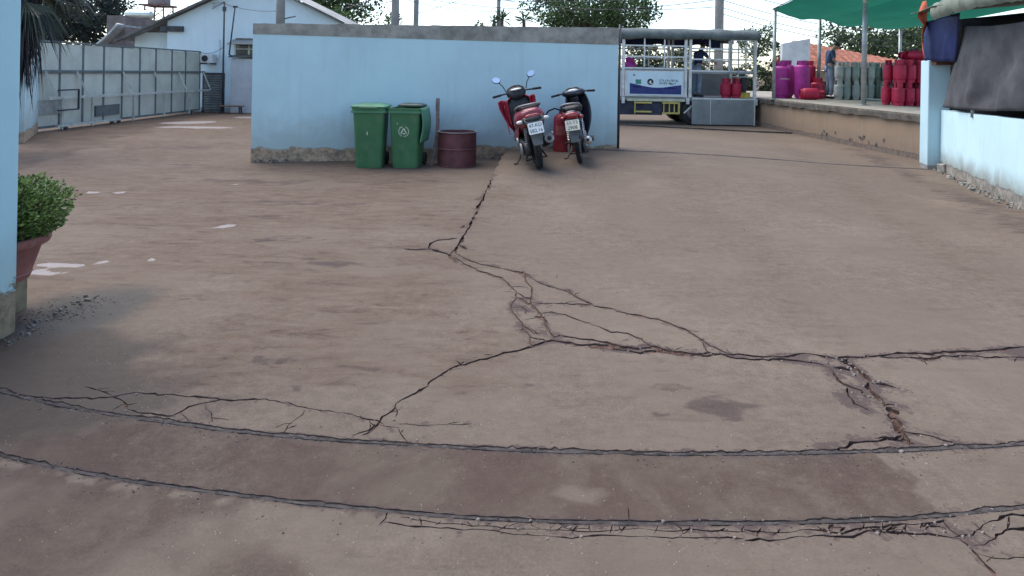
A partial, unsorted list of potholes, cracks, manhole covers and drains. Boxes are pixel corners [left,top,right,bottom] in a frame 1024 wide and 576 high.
crack [380,506,1024,576]
crack [17,250,1024,464]
